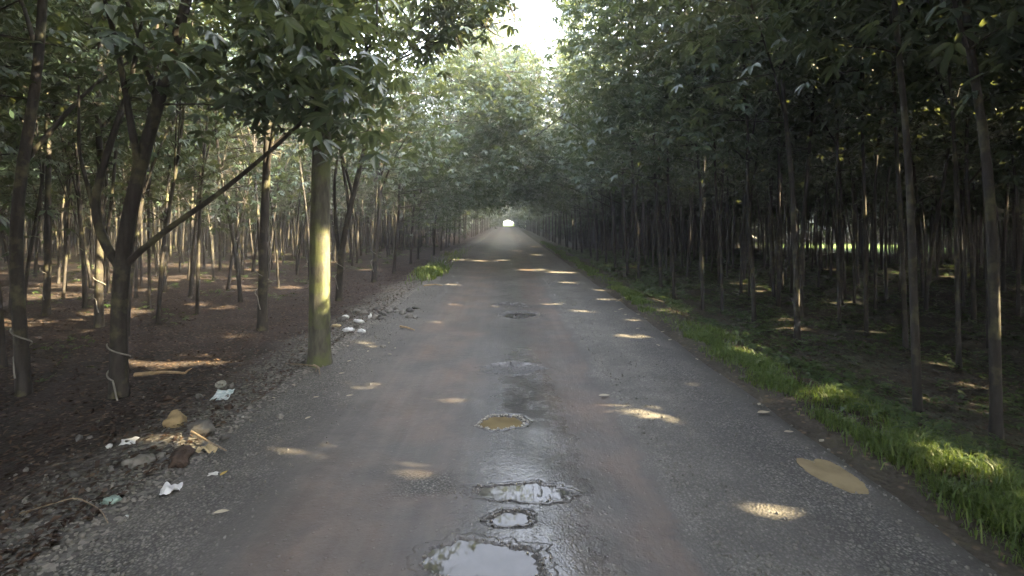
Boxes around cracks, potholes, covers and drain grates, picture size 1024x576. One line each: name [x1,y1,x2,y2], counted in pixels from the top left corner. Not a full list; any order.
pothole [472,360,556,376]
pothole [472,413,533,432]
pothole [480,506,538,528]
